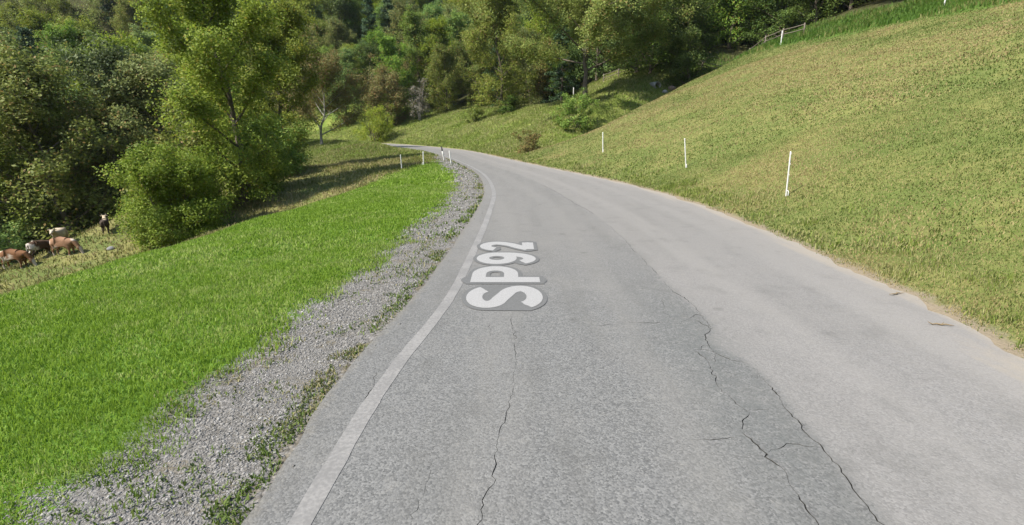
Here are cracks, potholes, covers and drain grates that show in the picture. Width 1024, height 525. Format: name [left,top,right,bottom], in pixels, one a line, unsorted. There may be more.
crack [661,287,884,525]
crack [477,319,532,525]
